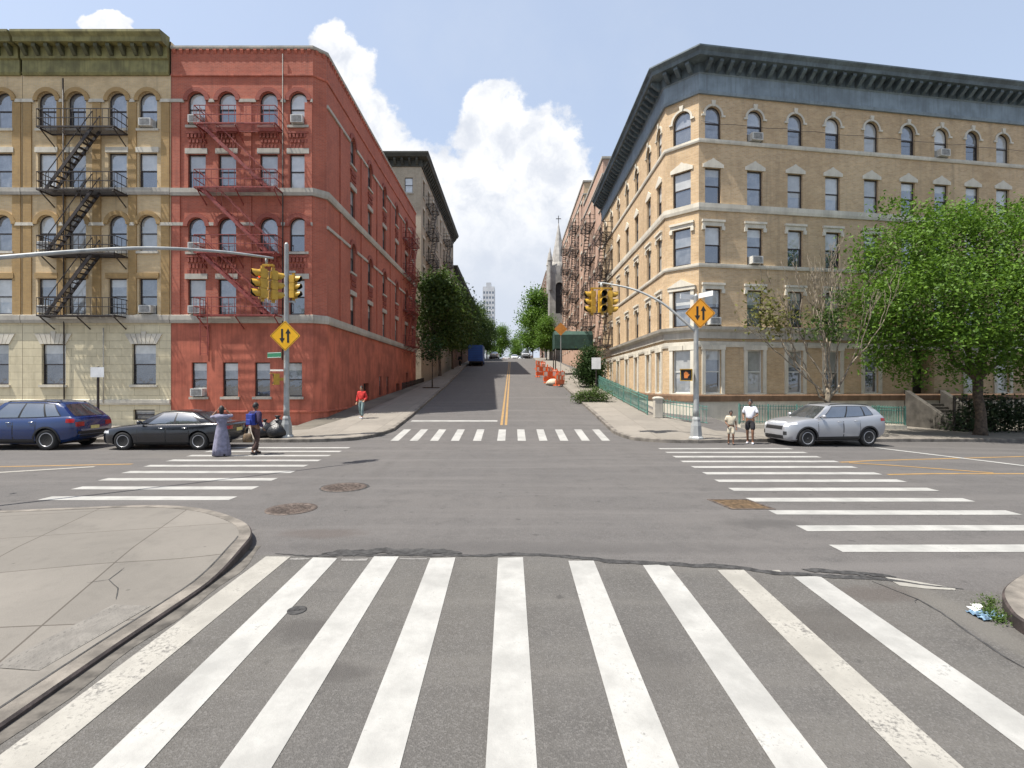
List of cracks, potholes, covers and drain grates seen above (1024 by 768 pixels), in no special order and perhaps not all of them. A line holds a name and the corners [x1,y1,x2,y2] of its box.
manhole cover [264,503,318,515]
utility cover [707,499,776,510]
manhole cover [319,483,370,492]
